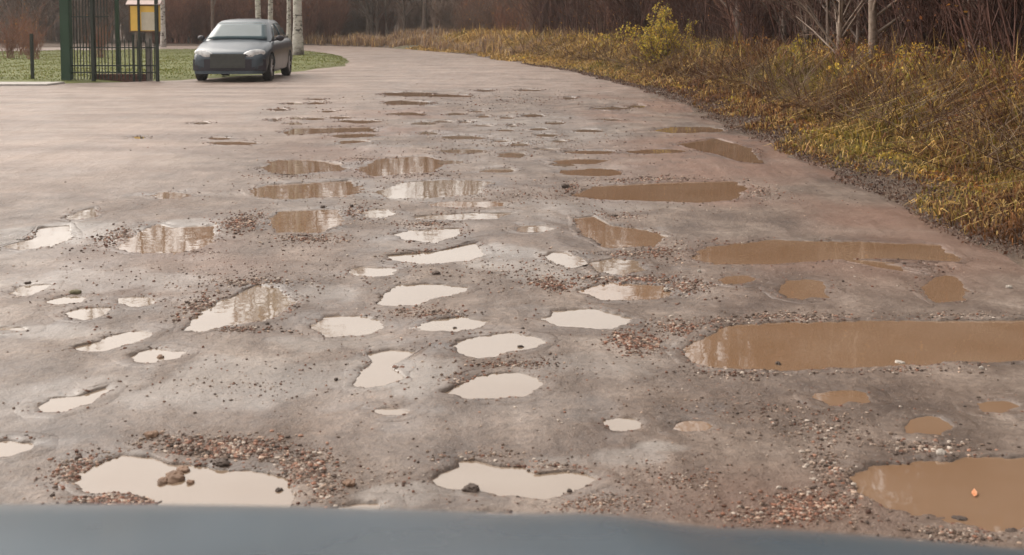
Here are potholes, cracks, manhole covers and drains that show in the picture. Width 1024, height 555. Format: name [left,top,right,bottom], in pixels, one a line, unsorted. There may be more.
pothole [172,281,310,335]
pothole [425,366,566,406]
pothole [12,381,128,418]
pothole [436,328,560,362]
pothole [524,304,647,332]
pothole [239,179,366,201]
pothole [824,450,1024,542]
pothole [54,448,320,507]
pothole [567,213,678,250]
pothole [666,315,1024,374]
pothole [108,221,227,256]
pothole [342,343,426,394]
